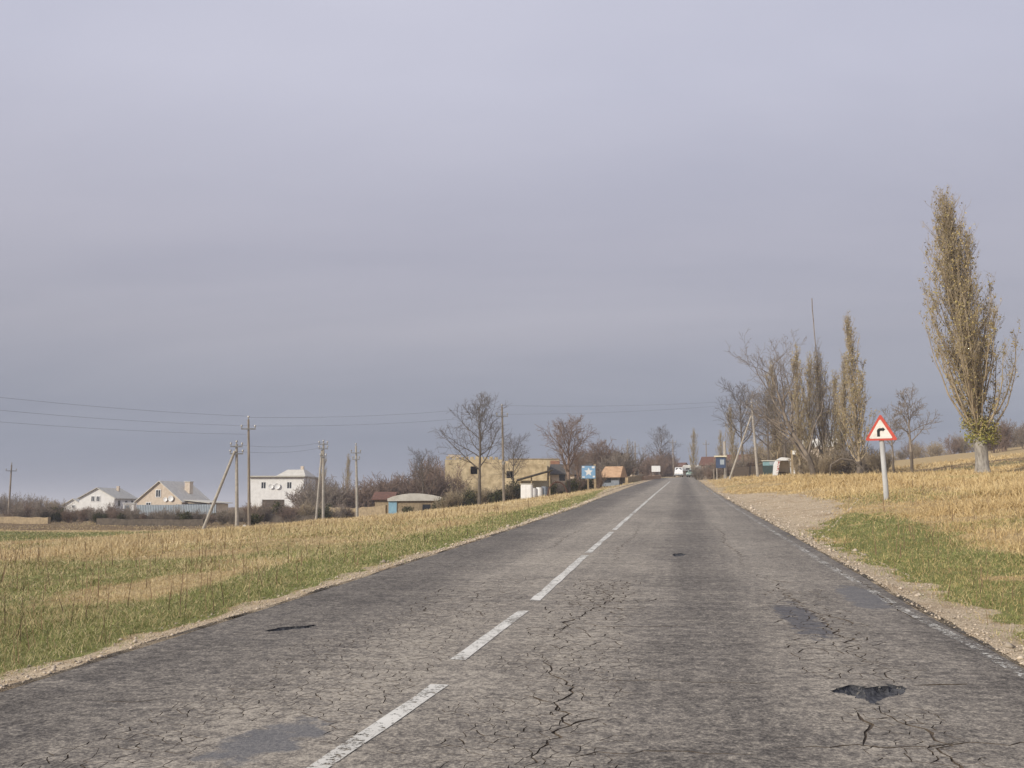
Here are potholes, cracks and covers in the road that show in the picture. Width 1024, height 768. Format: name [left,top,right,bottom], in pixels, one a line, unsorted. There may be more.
pothole [830,684,907,705]
crack [387,579,775,768]
crack [777,706,1024,768]
